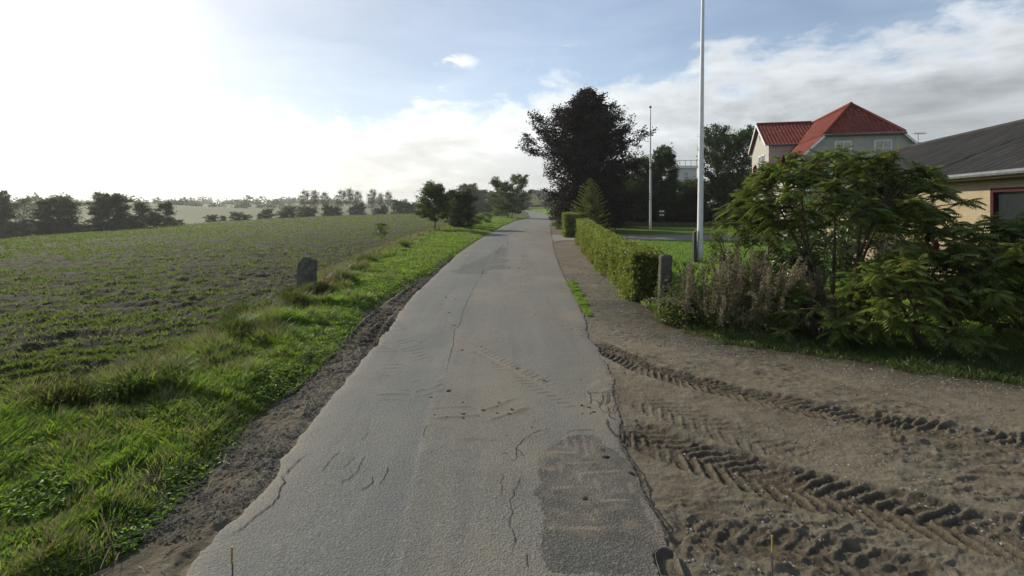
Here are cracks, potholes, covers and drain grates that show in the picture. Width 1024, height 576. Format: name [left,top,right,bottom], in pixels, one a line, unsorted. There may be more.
crack [233,432,388,533]
crack [500,389,672,566]
